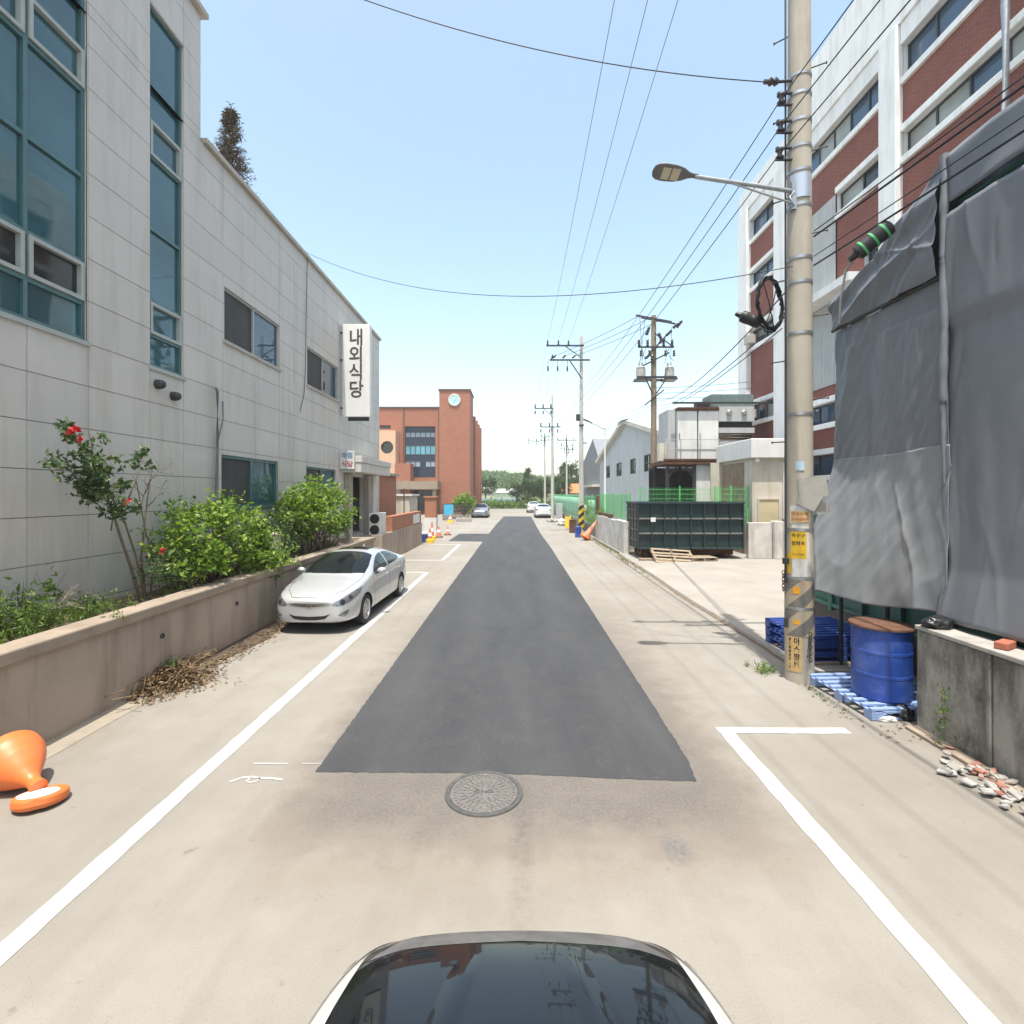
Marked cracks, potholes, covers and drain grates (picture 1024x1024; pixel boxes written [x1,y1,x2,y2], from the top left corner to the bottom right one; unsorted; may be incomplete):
manhole cover [445,771,523,818]
